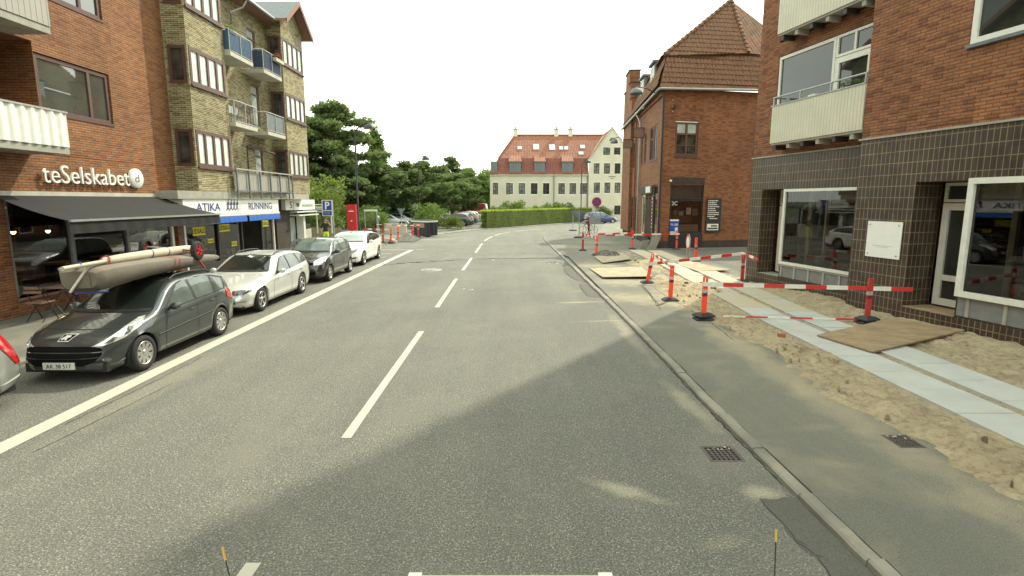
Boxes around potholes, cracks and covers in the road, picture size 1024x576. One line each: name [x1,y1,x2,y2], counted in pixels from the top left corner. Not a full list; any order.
drain grate [699,446,746,462]
drain grate [881,434,927,448]
